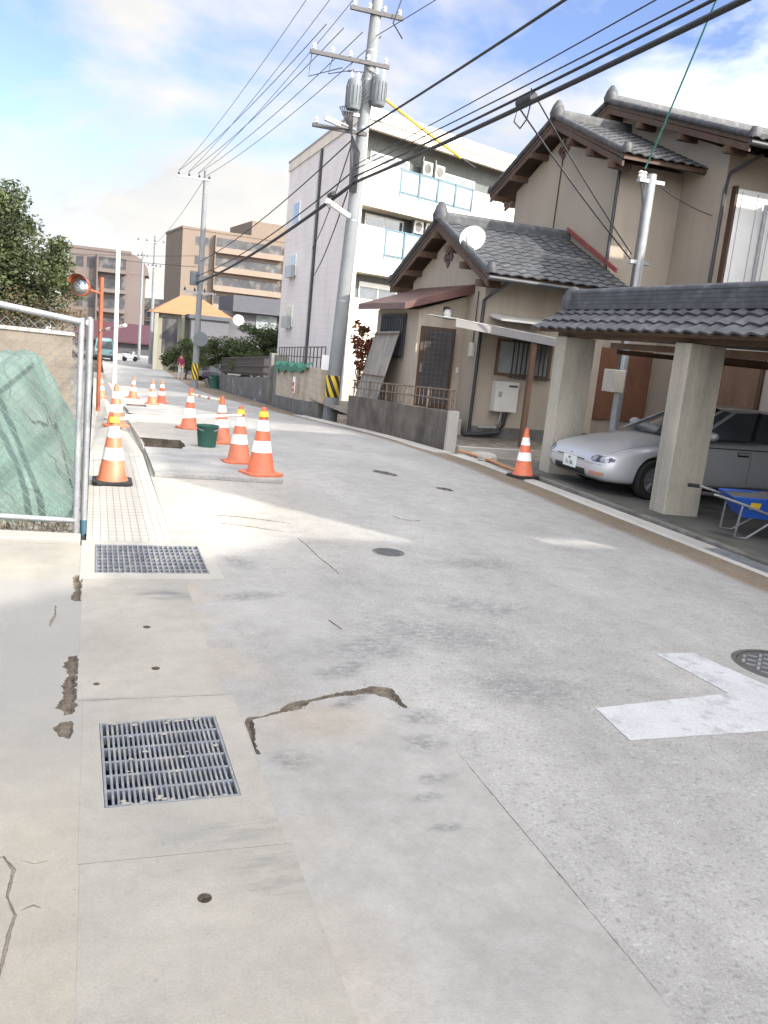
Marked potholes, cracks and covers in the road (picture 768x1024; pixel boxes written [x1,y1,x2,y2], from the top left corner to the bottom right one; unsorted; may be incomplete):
drain grate [95,544,209,574]
manhole cover [731,649,768,678]
crack [0,856,45,975]
crack [216,515,339,574]
crack [245,686,409,754]
pothole [53,721,74,739]
pothole [70,575,83,601]
pothole [55,655,79,715]
drain grate [99,716,241,808]
manhole cover [372,548,405,557]
